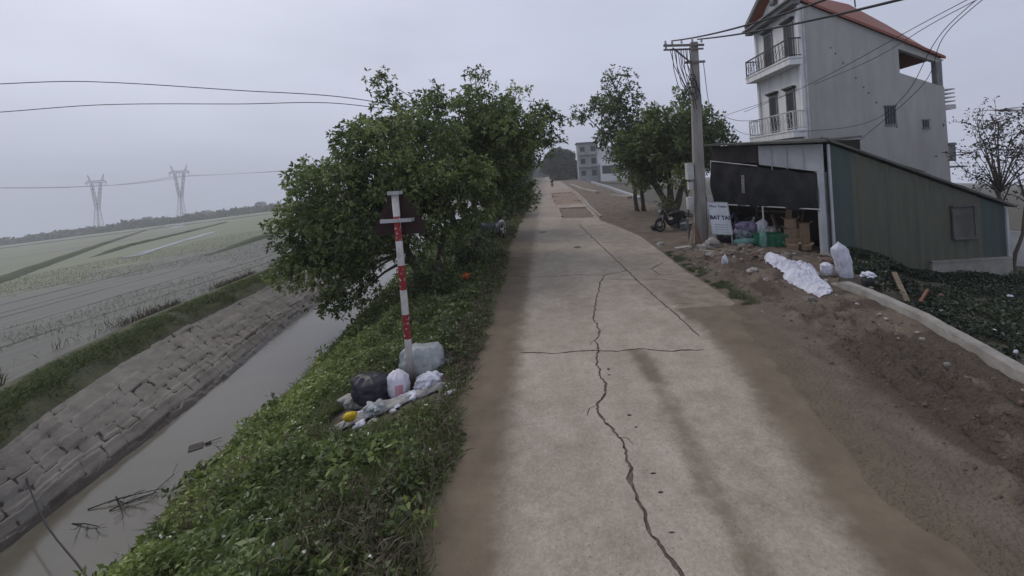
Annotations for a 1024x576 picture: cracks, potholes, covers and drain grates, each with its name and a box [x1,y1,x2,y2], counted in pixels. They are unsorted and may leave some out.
crack [513,254,704,576]
